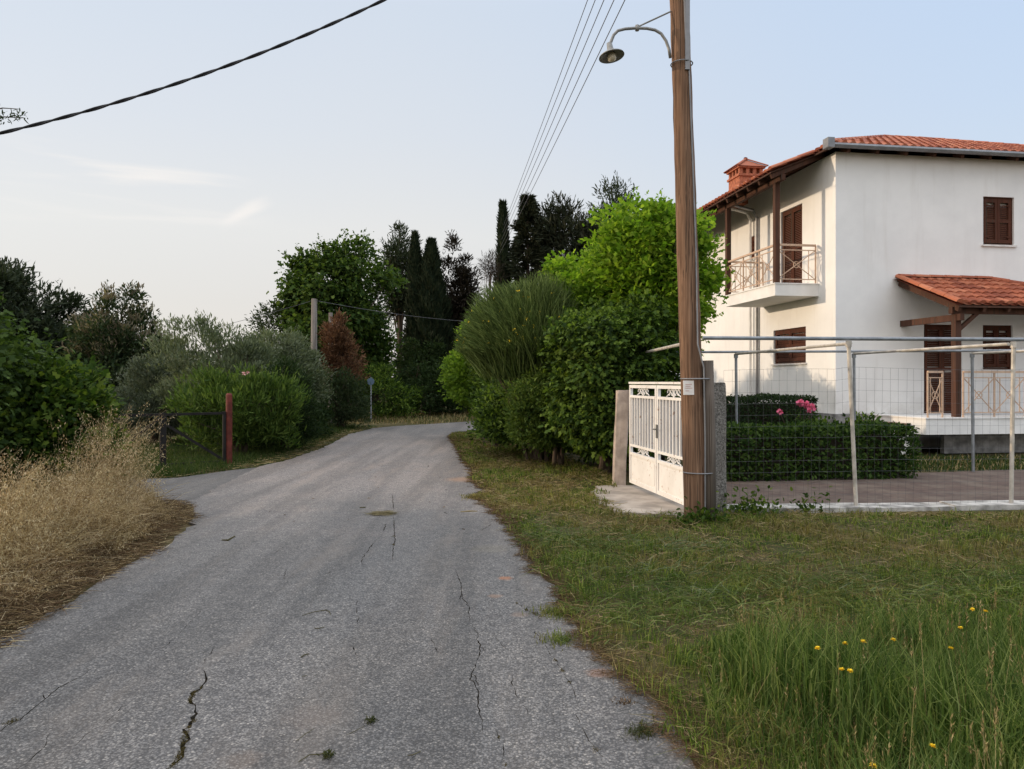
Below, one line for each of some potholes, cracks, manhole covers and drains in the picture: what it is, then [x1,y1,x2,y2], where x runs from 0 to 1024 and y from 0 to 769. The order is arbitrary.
crack [166,649,213,769]
crack [361,495,396,565]
crack [0,672,87,769]
crack [516,602,603,757]
crack [457,575,508,766]
